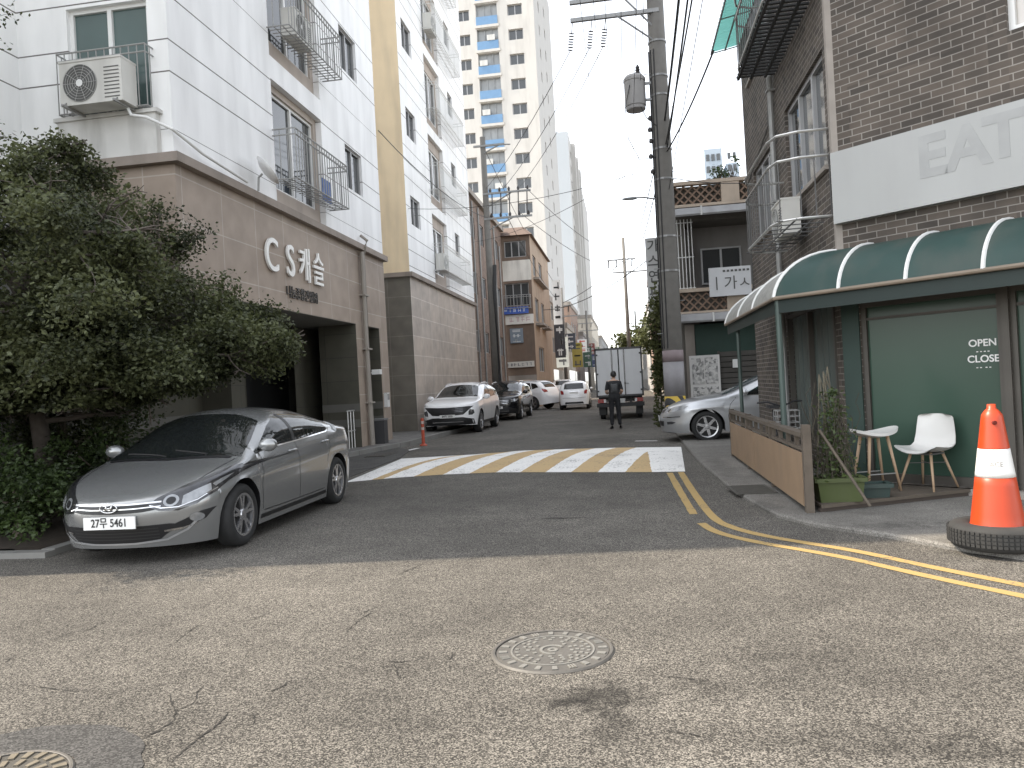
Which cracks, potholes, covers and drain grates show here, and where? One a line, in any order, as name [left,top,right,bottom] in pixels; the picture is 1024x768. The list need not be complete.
crack [145,685,230,761]
drain grate [726,484,778,495]
manhole cover [491,630,615,674]
